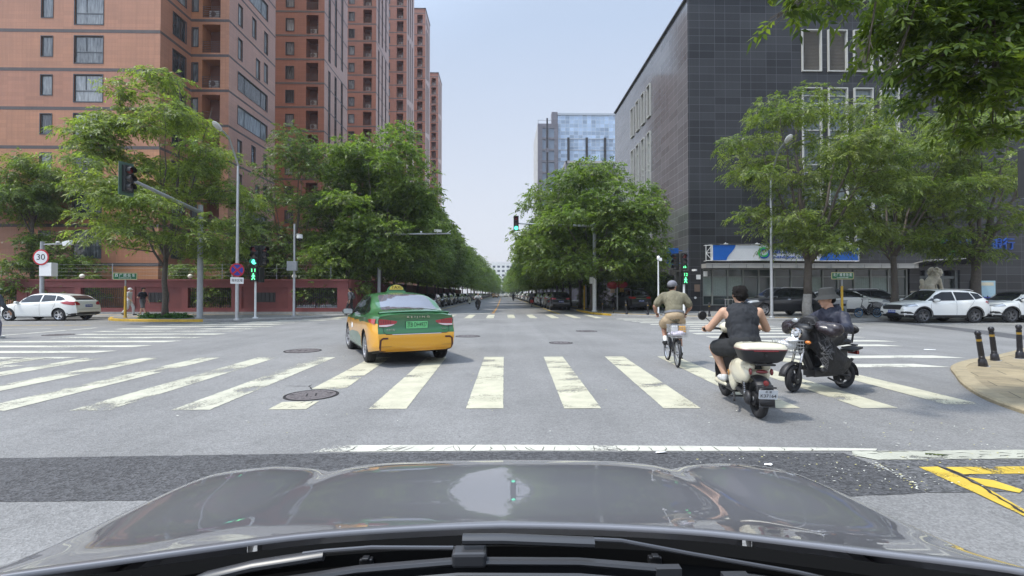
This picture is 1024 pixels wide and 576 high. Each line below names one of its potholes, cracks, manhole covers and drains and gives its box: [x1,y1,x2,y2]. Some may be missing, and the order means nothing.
manhole cover [283,389,339,401]
